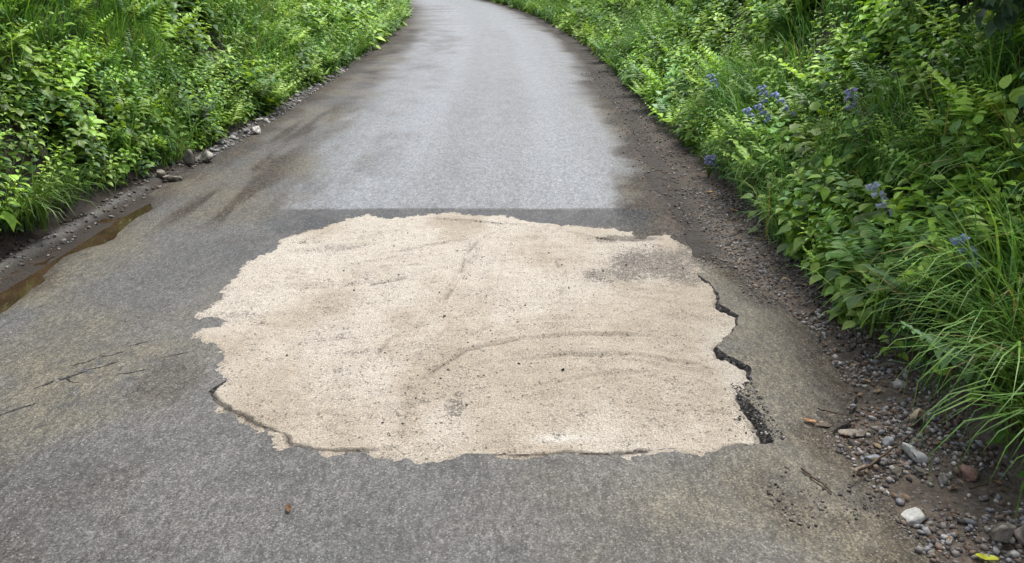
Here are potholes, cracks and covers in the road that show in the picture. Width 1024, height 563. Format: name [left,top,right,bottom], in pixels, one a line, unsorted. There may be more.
crack [0,341,188,416]
